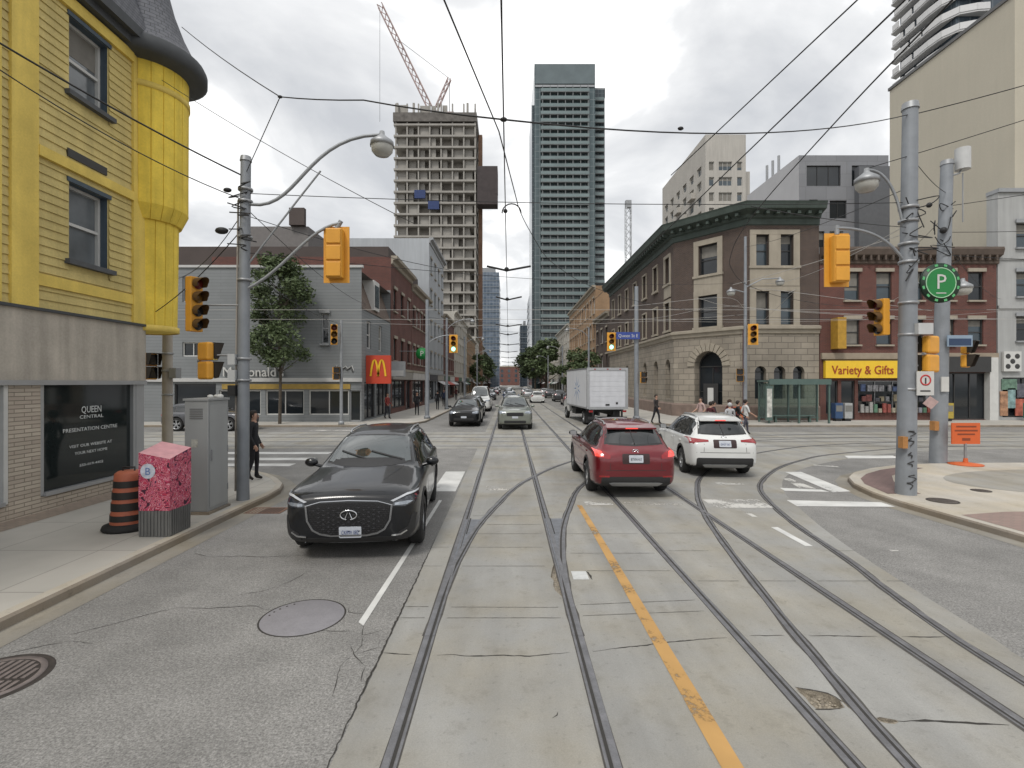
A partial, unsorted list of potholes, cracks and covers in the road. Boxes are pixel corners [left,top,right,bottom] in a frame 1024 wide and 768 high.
manhole cover [257,599,346,637]
pothole [795,687,845,709]
